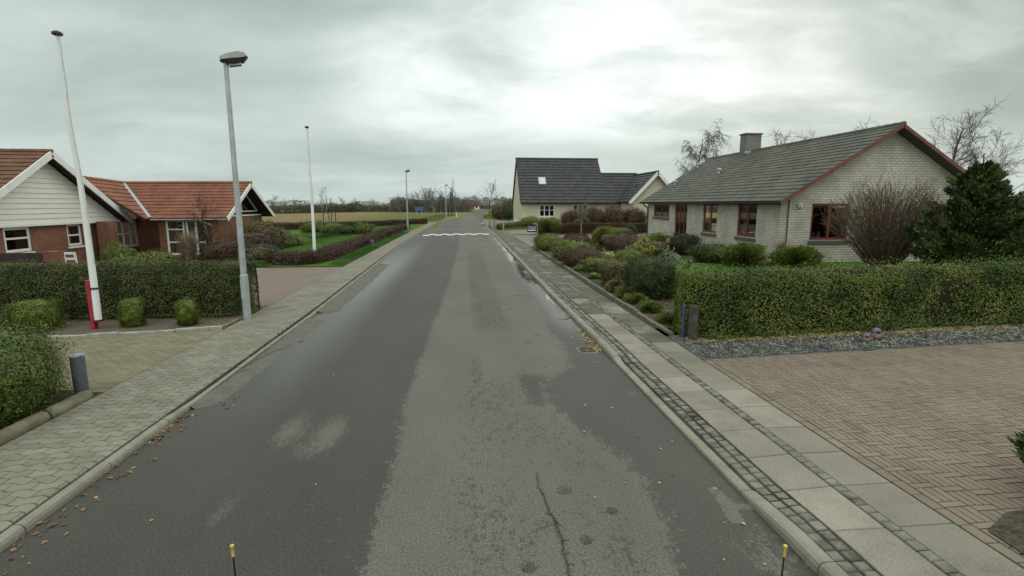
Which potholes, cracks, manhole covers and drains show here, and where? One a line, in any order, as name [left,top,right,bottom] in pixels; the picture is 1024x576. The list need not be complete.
crack [536,474,575,576]
pothole [520,561,539,573]
